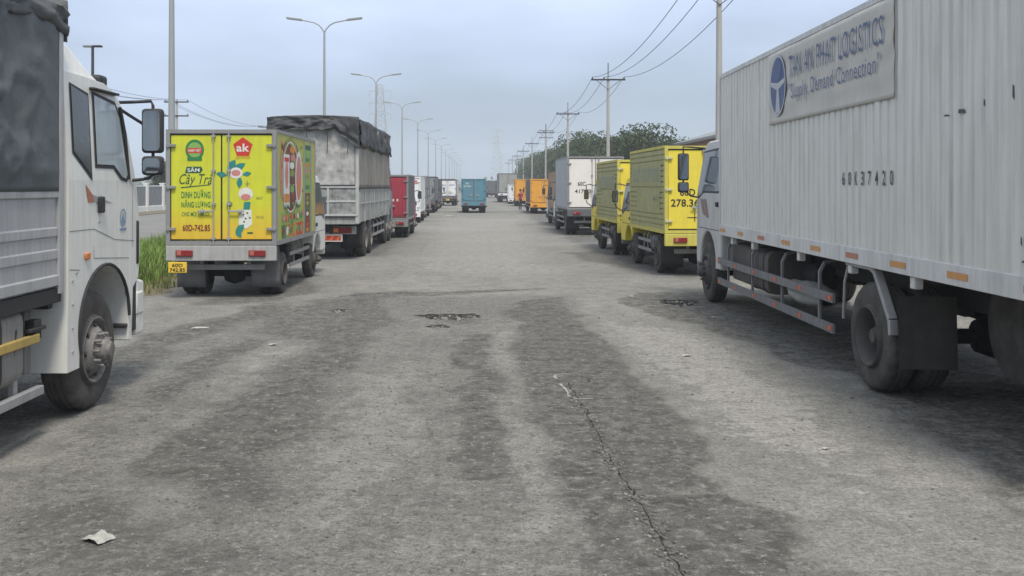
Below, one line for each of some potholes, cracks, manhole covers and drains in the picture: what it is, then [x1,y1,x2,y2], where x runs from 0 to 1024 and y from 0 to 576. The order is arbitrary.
pothole [414,313,481,321]
crack [566,379,684,576]
